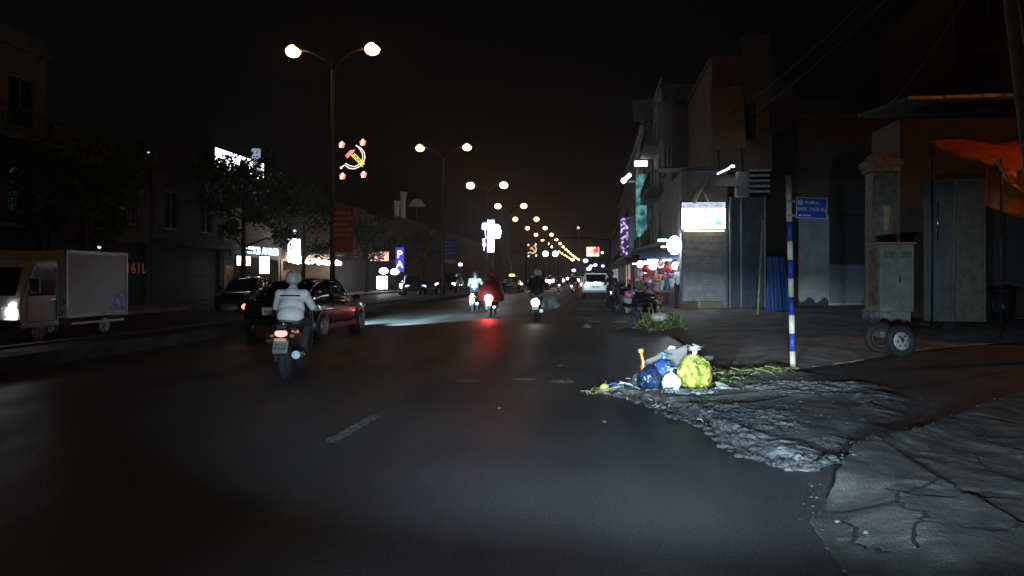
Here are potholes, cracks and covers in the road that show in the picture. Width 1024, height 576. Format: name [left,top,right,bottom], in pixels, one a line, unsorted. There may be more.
crack [967,521,1022,532]
crack [960,425,1024,482]
crack [842,478,939,553]
